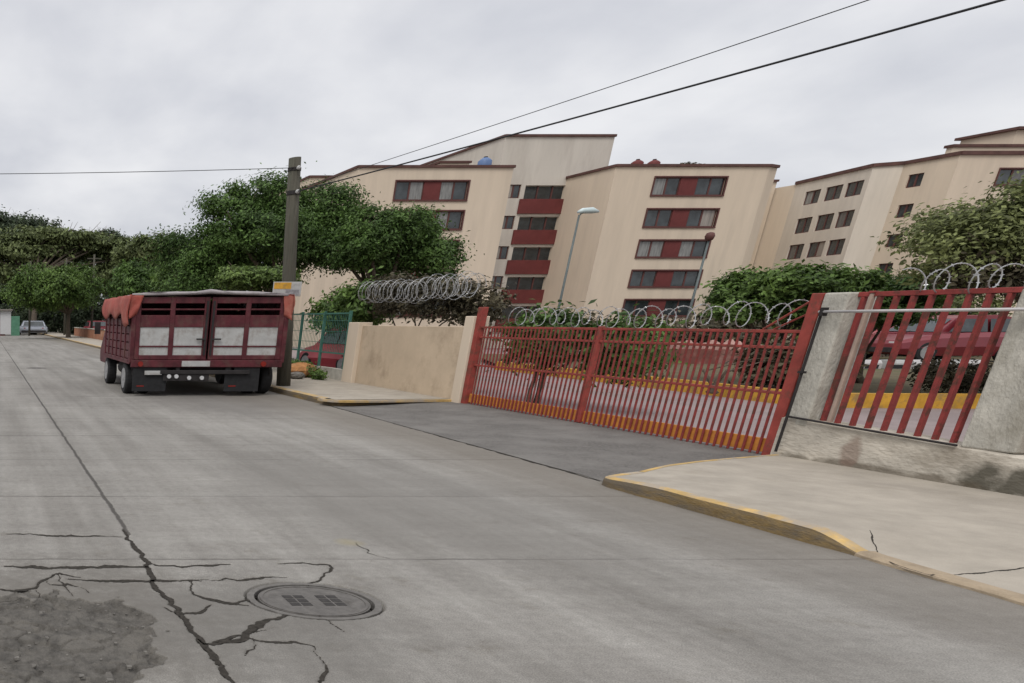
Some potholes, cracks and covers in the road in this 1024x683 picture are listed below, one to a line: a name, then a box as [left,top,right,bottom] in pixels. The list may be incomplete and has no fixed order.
crack [870,531,1024,580]
crack [0,562,342,683]
manhole cover [246,583,383,621]
